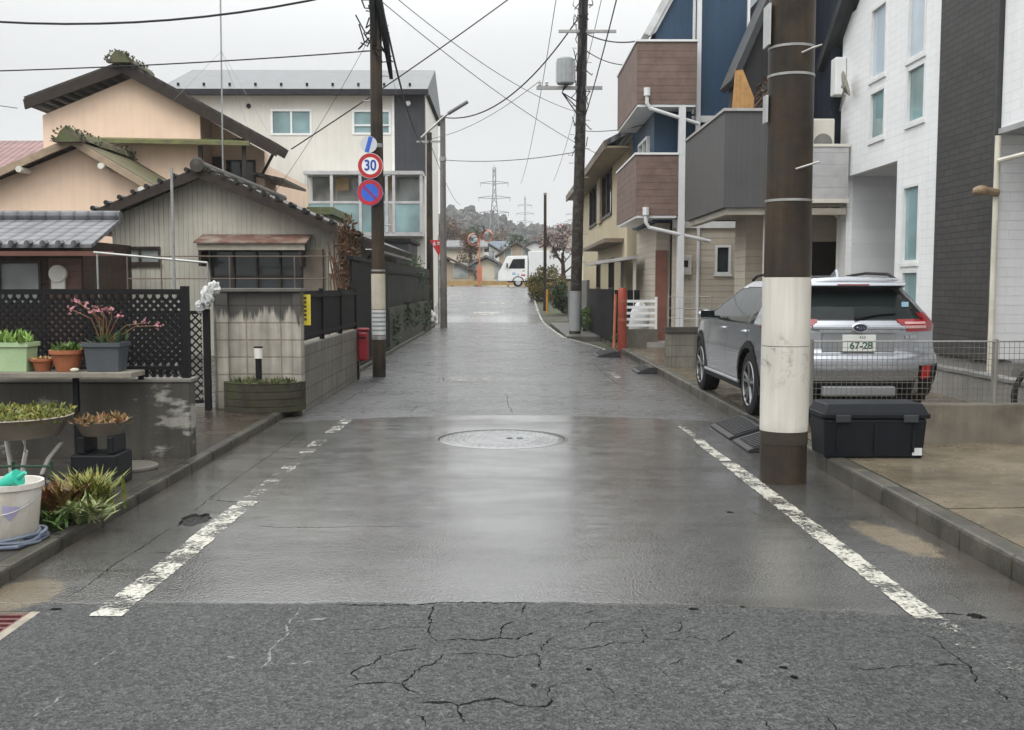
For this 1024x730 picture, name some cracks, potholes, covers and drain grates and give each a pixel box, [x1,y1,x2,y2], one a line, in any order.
pothole [178,513,212,527]
manhole cover [435,429,568,449]
crack [220,605,425,668]
crack [855,593,1009,701]
crack [349,610,735,726]
